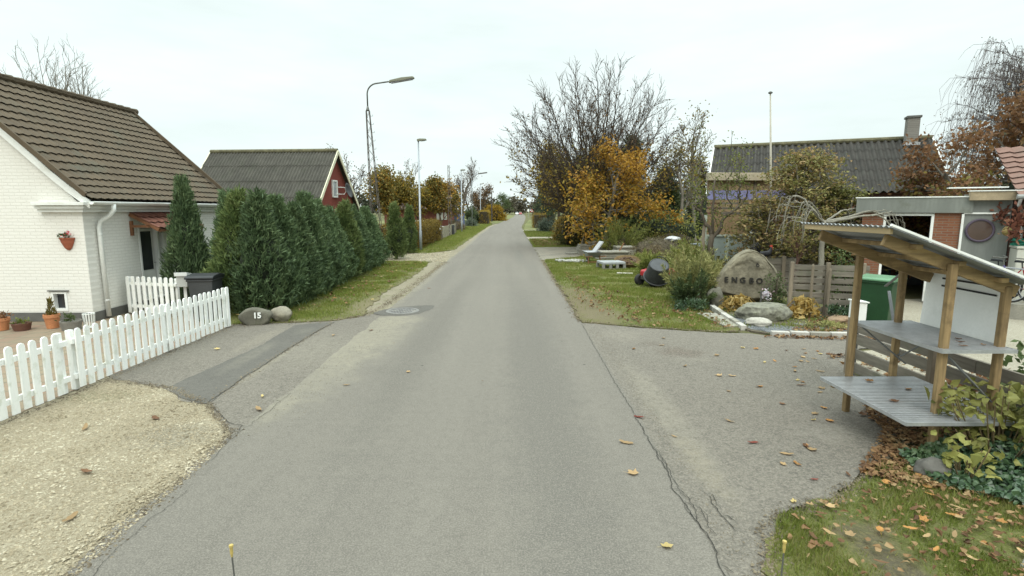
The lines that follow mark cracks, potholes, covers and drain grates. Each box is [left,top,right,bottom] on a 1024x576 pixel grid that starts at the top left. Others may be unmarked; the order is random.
crack [583,326,735,576]
